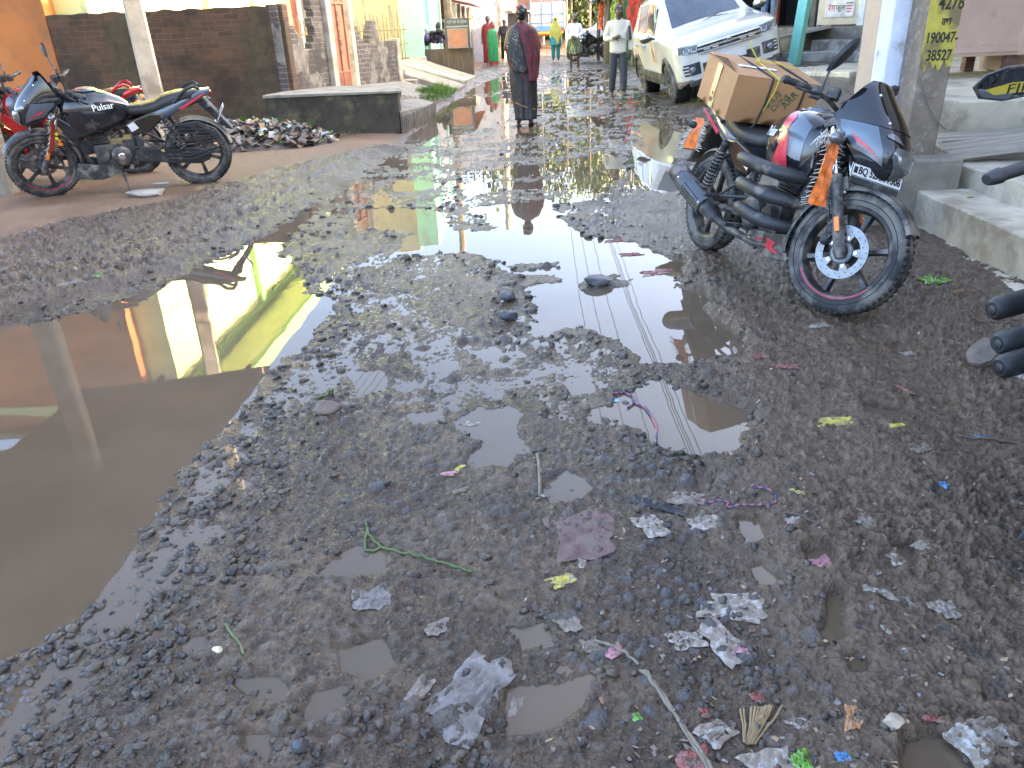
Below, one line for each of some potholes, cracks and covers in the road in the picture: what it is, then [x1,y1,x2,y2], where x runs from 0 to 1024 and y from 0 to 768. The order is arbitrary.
pothole [560,376,598,397]
pothole [313,539,393,578]
pothole [498,667,599,740]
pothole [505,616,560,653]
pothole [352,153,759,365]
pothole [622,123,694,195]
pothole [583,377,765,456]
pothole [449,404,537,469]
pothole [406,409,448,425]
pothole [815,578,859,645]
pothole [0,203,339,662]
pothole [426,357,463,375]
